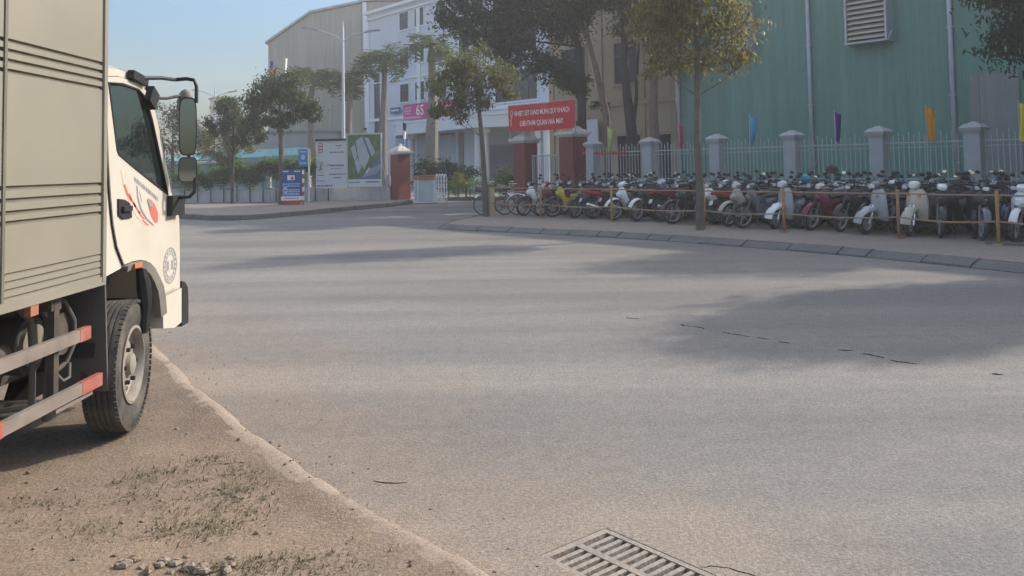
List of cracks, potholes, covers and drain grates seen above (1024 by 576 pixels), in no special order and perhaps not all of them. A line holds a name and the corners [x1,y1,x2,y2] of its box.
crack [841,350,915,364]
crack [701,566,755,576]
drain grate [540,528,715,576]
